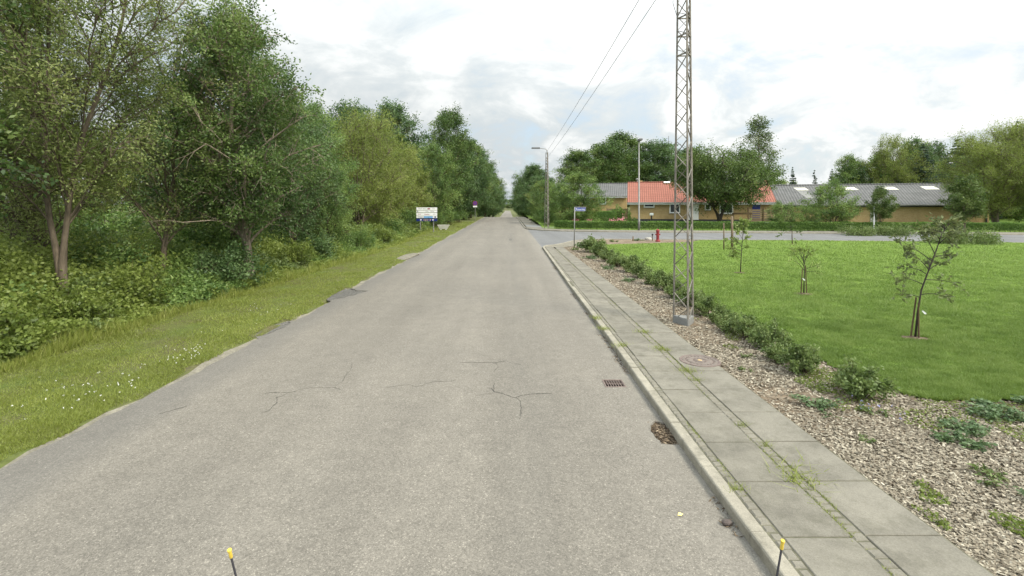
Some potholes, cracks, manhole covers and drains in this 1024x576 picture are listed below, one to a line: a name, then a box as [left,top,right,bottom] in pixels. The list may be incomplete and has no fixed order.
drain grate [602,379,626,387]
crack [474,361,551,415]
manhole cover [679,354,721,367]
